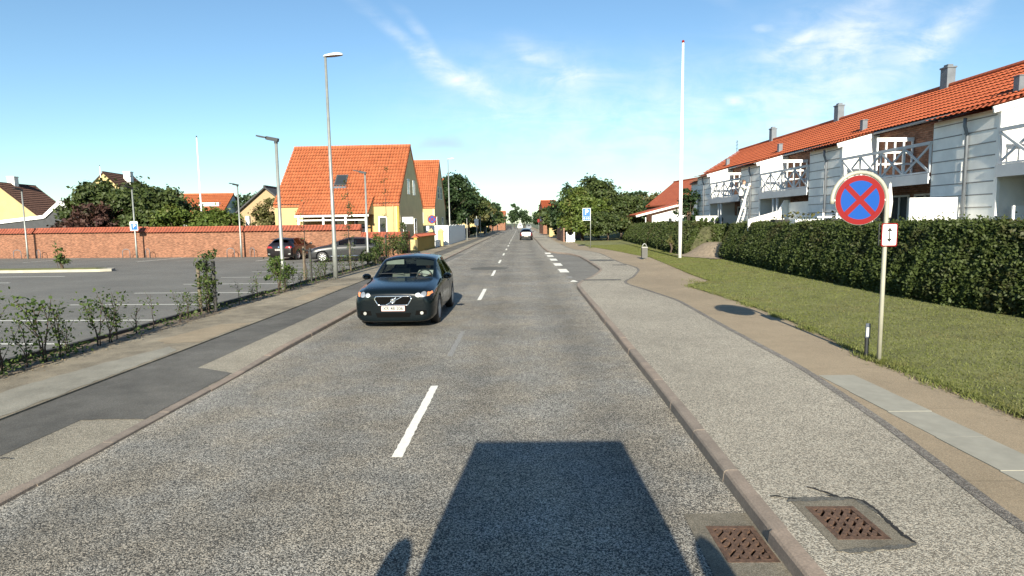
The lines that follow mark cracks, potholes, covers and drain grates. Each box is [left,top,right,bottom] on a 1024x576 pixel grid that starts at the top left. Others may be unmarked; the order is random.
drain grate [706,526,780,563]
drain grate [805,506,891,540]
